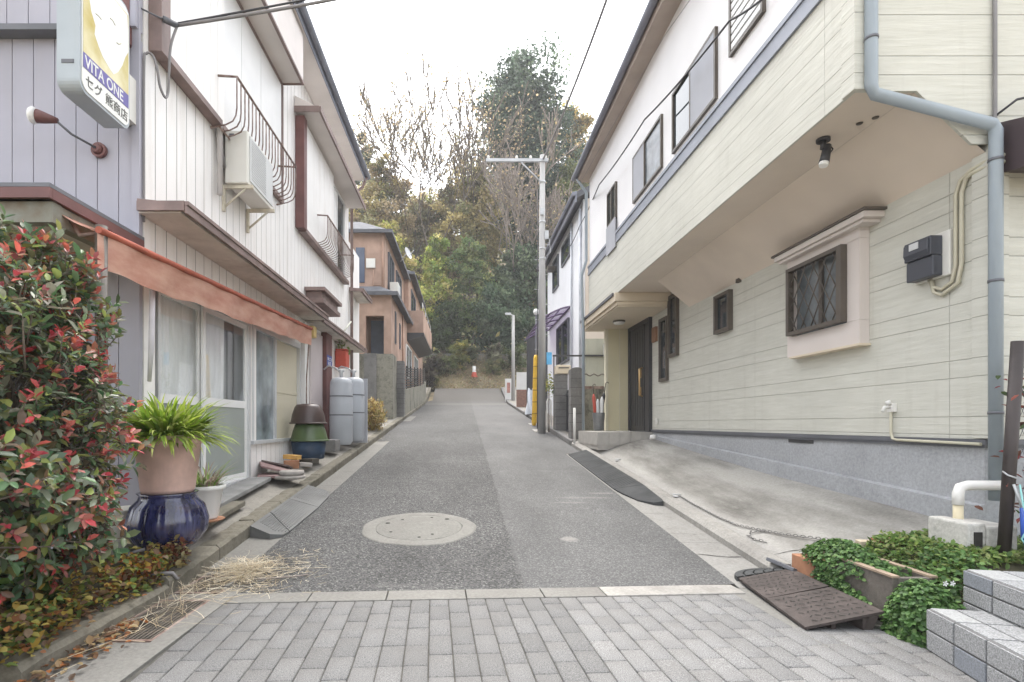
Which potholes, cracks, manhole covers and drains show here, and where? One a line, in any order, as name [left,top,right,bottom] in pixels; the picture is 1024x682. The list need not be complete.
drain grate [92,600,209,643]
manhole cover [362,513,477,546]
